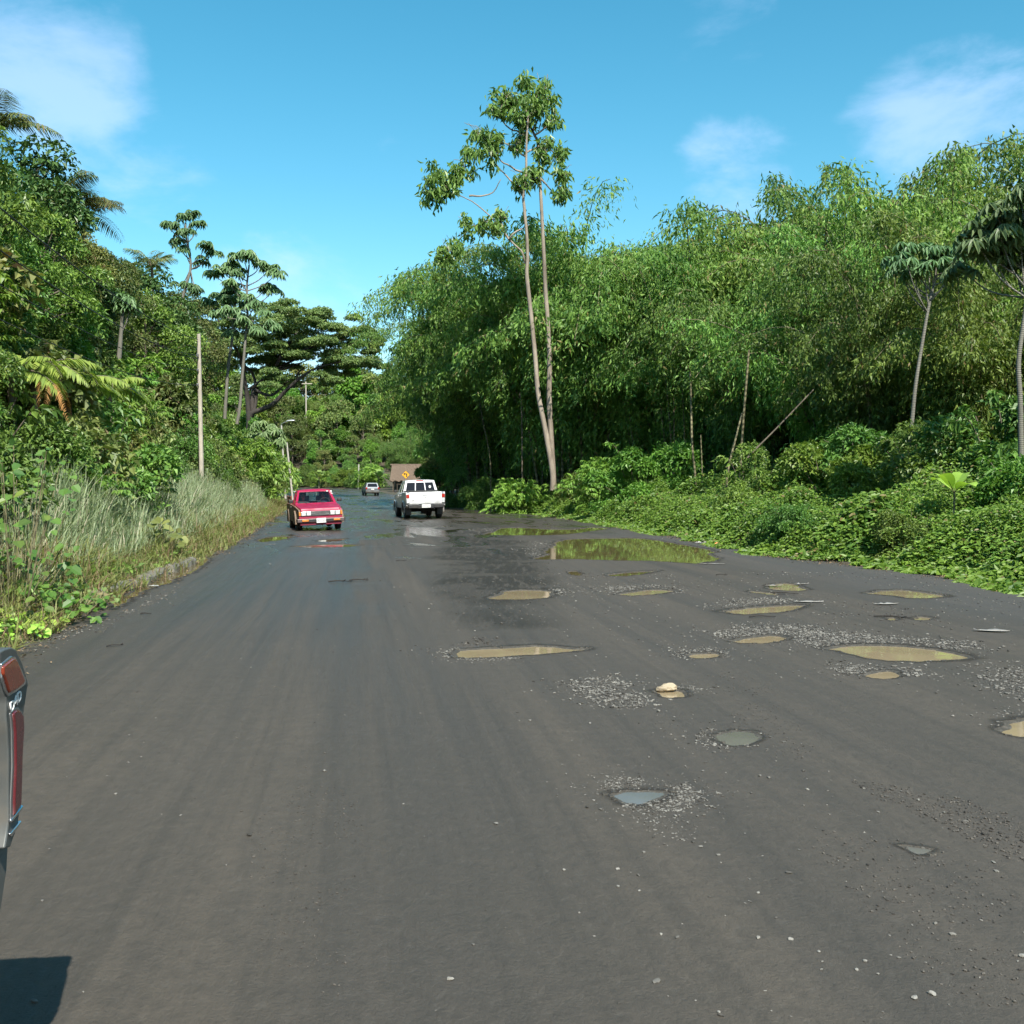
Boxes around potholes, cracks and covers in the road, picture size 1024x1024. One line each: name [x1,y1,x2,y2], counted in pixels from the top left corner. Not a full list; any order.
pothole [723,634,794,644]
pothole [650,688,691,698]
pothole [858,669,908,679]
pothole [484,589,556,600]
pothole [818,643,979,662]
pothole [448,644,594,658]
pothole [614,588,678,596]
pothole [531,537,724,564]
pothole [894,843,937,856]
pothole [602,788,677,806]
pothole [709,728,765,746]
pothole [862,589,952,599]
